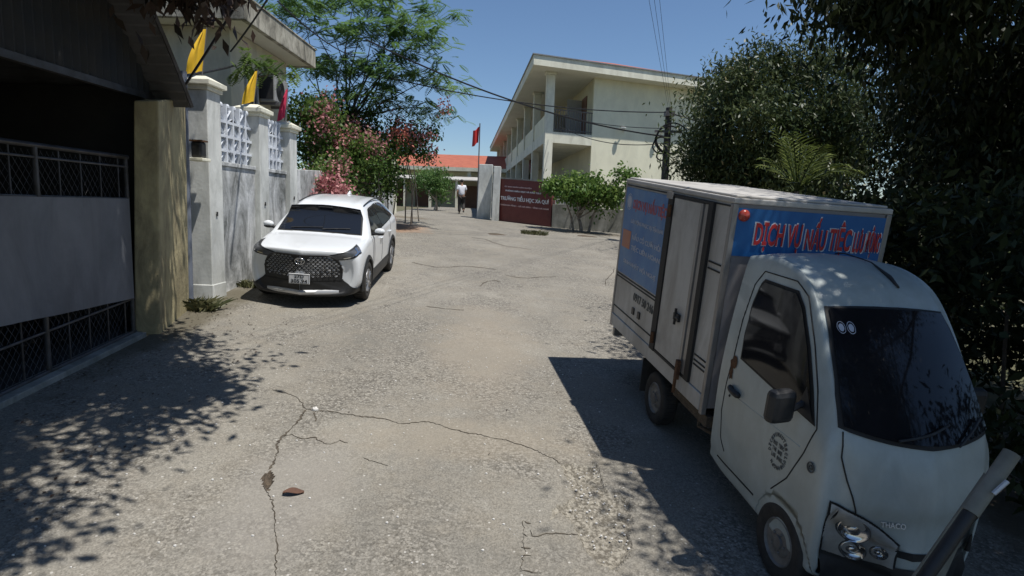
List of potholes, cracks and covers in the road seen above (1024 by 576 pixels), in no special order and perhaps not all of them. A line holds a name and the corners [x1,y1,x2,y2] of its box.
crack [263,390,559,573]
